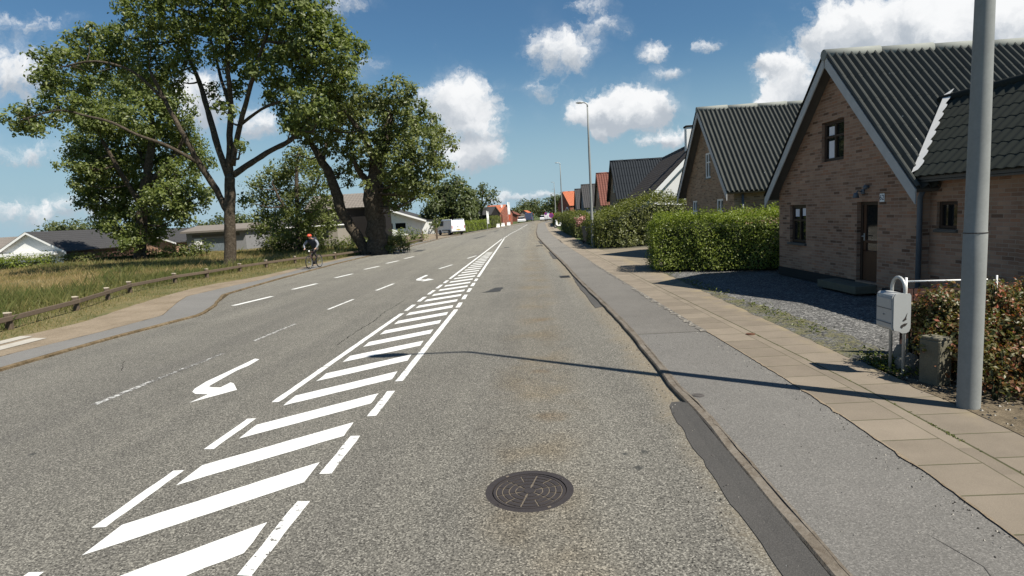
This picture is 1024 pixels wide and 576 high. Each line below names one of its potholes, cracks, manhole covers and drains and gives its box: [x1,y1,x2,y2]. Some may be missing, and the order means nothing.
manhole cover [485,471,574,512]
